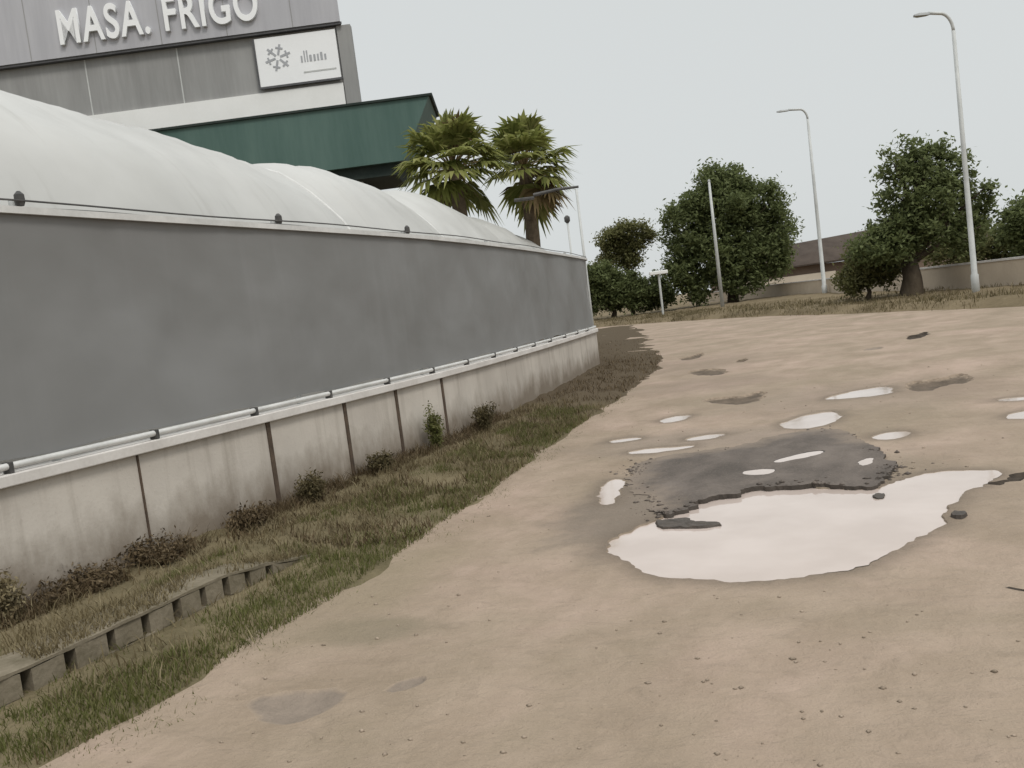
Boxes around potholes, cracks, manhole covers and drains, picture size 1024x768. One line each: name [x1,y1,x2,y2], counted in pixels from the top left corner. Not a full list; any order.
pothole [779,411,844,429]
pothole [1006,410,1024,419]
pothole [871,431,911,440]
pothole [606,470,1002,582]
pothole [825,386,894,399]
pothole [660,415,692,423]
pothole [597,479,626,505]
